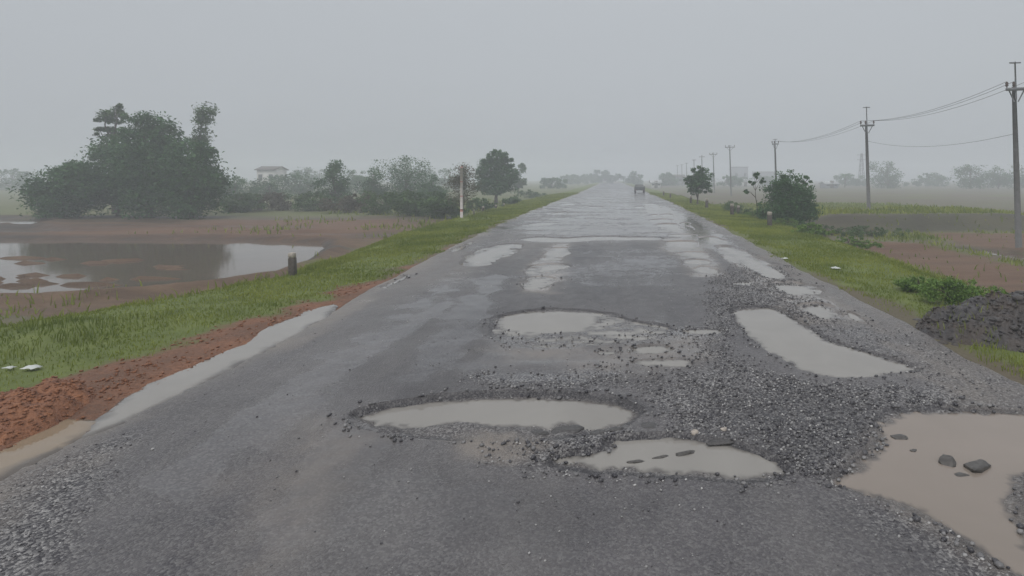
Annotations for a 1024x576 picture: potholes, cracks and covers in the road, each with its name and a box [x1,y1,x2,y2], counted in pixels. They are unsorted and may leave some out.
pothole [824,404,1024,576]
pothole [694,236,732,244]
pothole [630,357,697,367]
pothole [692,265,721,274]
pothole [517,276,558,290]
pothole [728,305,923,378]
pothole [629,343,674,354]
pothole [664,240,699,248]
pothole [544,431,790,484]
pothole [487,307,676,348]
pothole [764,281,826,295]
pothole [535,247,573,261]
